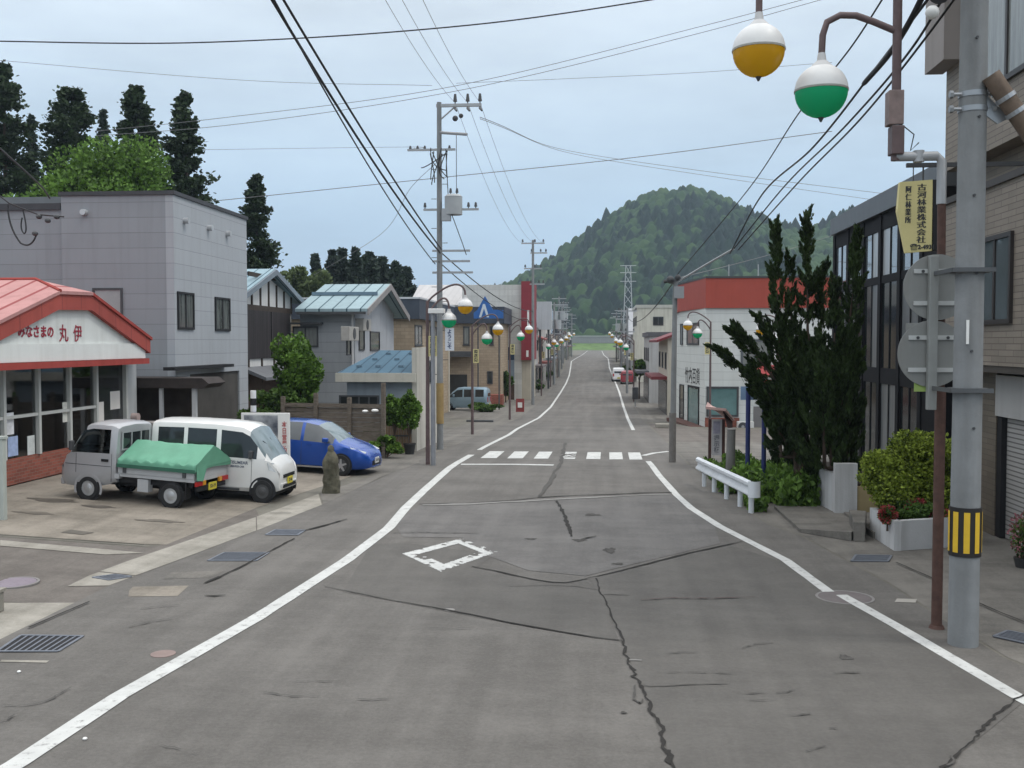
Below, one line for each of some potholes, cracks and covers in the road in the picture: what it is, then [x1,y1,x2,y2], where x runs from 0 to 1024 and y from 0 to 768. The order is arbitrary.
drain grate [992,630,1024,643]
drain grate [850,554,893,562]
drain grate [0,634,85,652]
manhole cover [0,577,40,589]
manhole cover [815,590,875,604]
crack [595,578,756,768]
crack [939,694,1024,768]
drain grate [207,552,270,561]
crack [556,501,595,539]
